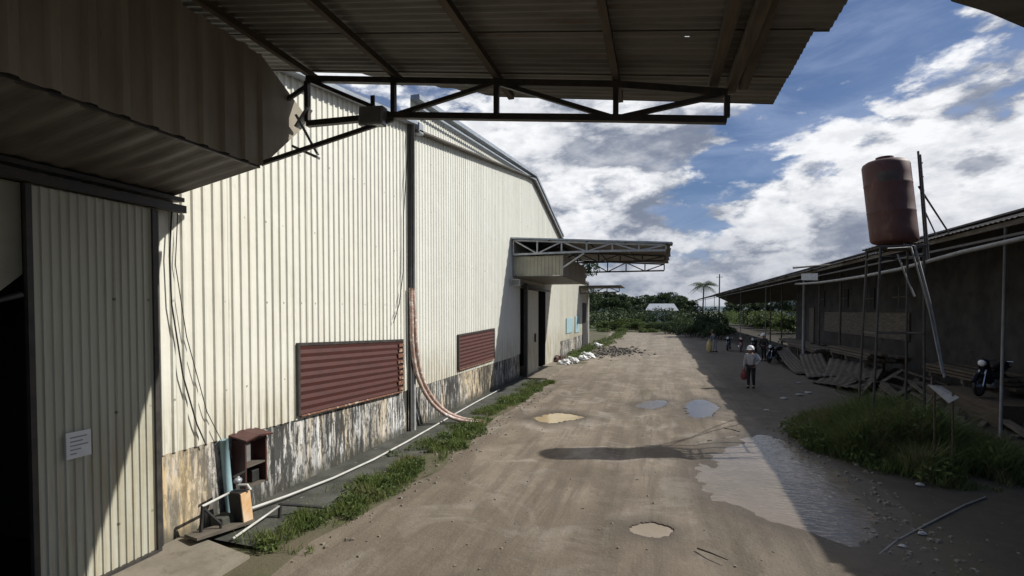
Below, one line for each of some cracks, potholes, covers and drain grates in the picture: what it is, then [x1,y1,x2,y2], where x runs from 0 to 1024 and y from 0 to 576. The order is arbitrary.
pothole [683,398,721,418]
pothole [628,522,674,538]
pothole [635,399,669,409]
pothole [529,412,588,424]
